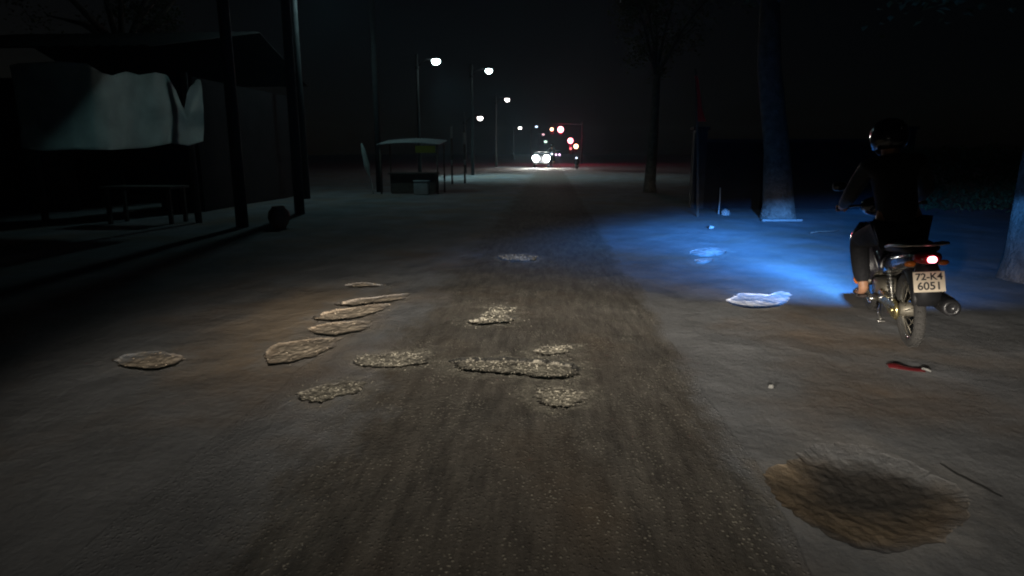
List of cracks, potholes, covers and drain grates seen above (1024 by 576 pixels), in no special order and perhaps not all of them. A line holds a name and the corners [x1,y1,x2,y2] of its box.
pothole [343,350,437,372]
pothole [497,254,538,263]
pothole [439,355,592,383]
pothole [290,377,377,407]
pothole [509,383,587,417]
pothole [465,303,529,329]
pothole [763,442,972,554]
crack [940,463,1002,497]
pothole [520,343,579,360]
